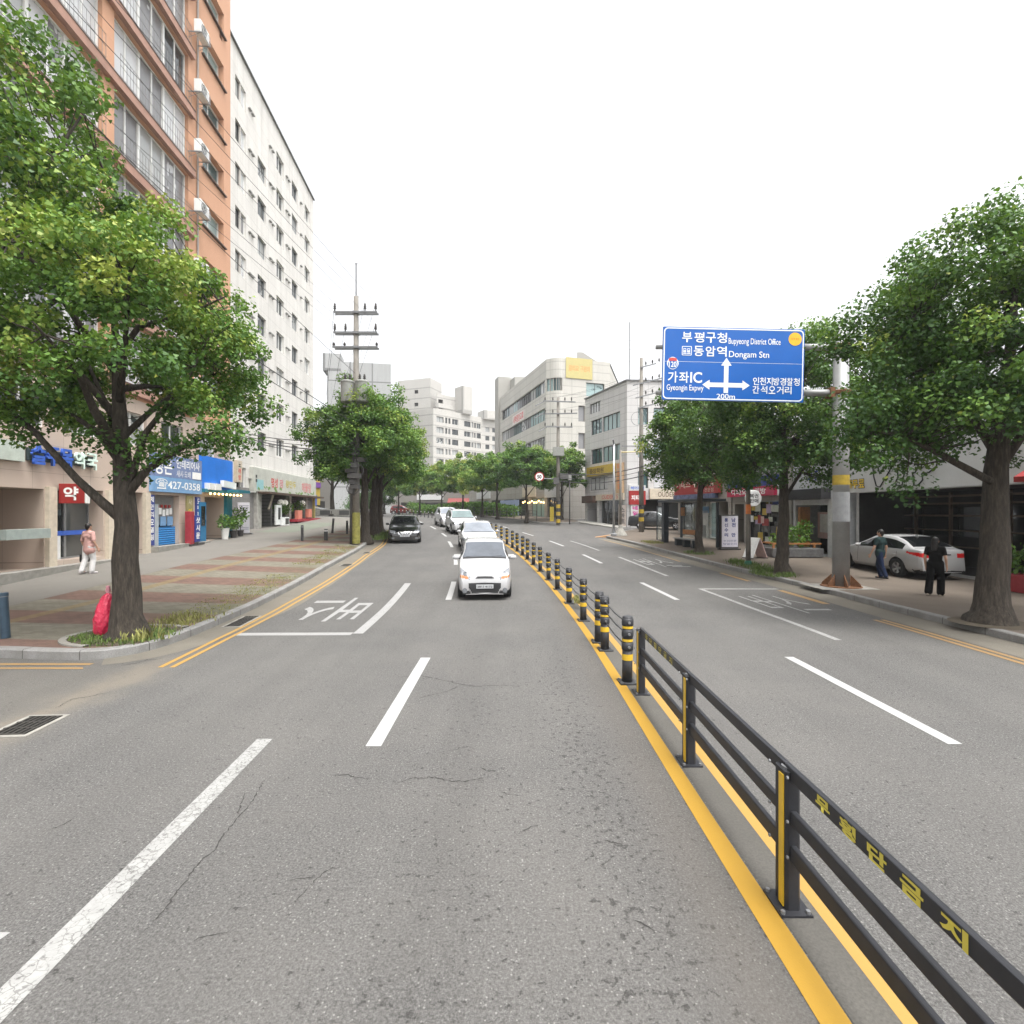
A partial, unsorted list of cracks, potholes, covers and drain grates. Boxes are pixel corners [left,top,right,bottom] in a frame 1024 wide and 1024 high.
drain grate [220,616,261,628]
drain grate [0,714,71,738]
crack [138,779,266,936]
crack [383,676,526,709]
crack [339,768,495,783]
crack [288,865,343,904]
